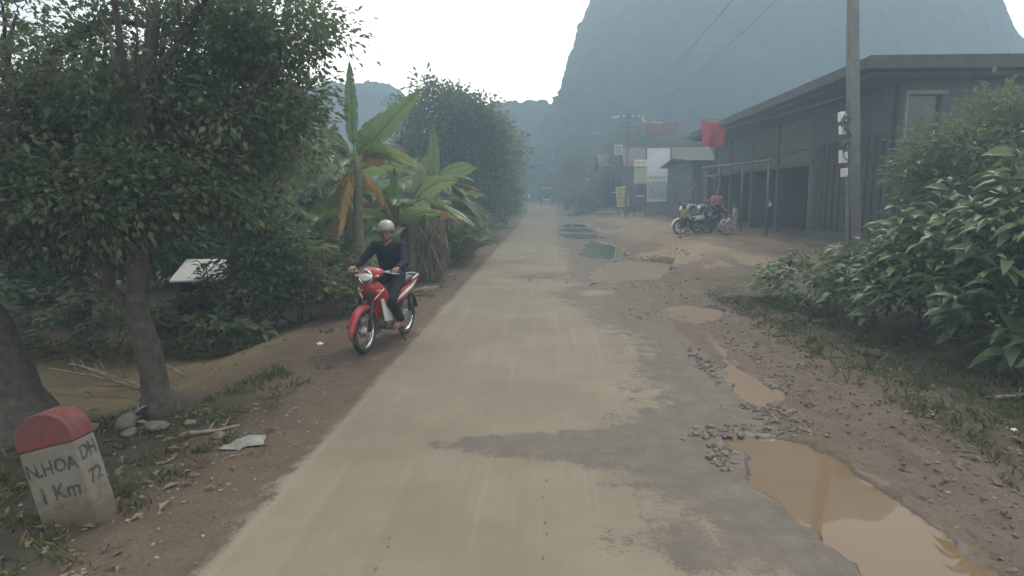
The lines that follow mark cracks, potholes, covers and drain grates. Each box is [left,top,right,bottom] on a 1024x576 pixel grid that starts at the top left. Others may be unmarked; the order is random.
pothole [567,239,643,262]
pothole [565,247,703,290]
pothole [681,412,1010,576]
pothole [687,326,821,416]
pothole [628,297,752,326]
